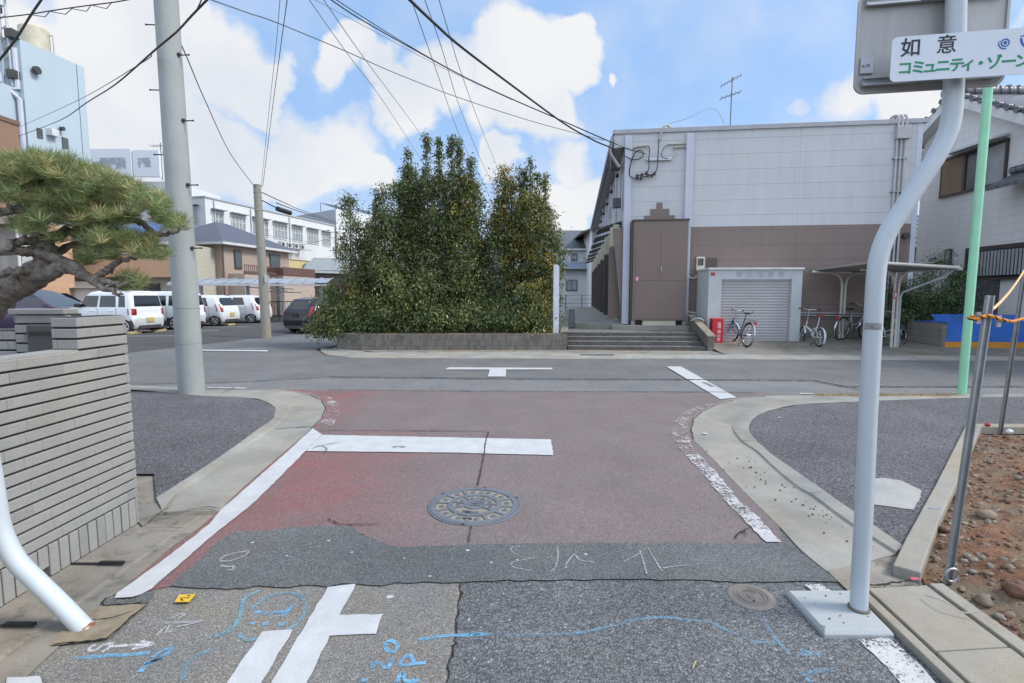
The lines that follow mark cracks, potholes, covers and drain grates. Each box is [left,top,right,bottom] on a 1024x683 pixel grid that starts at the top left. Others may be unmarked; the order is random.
manhole cover [428,487,521,526]
manhole cover [727,583,776,610]
